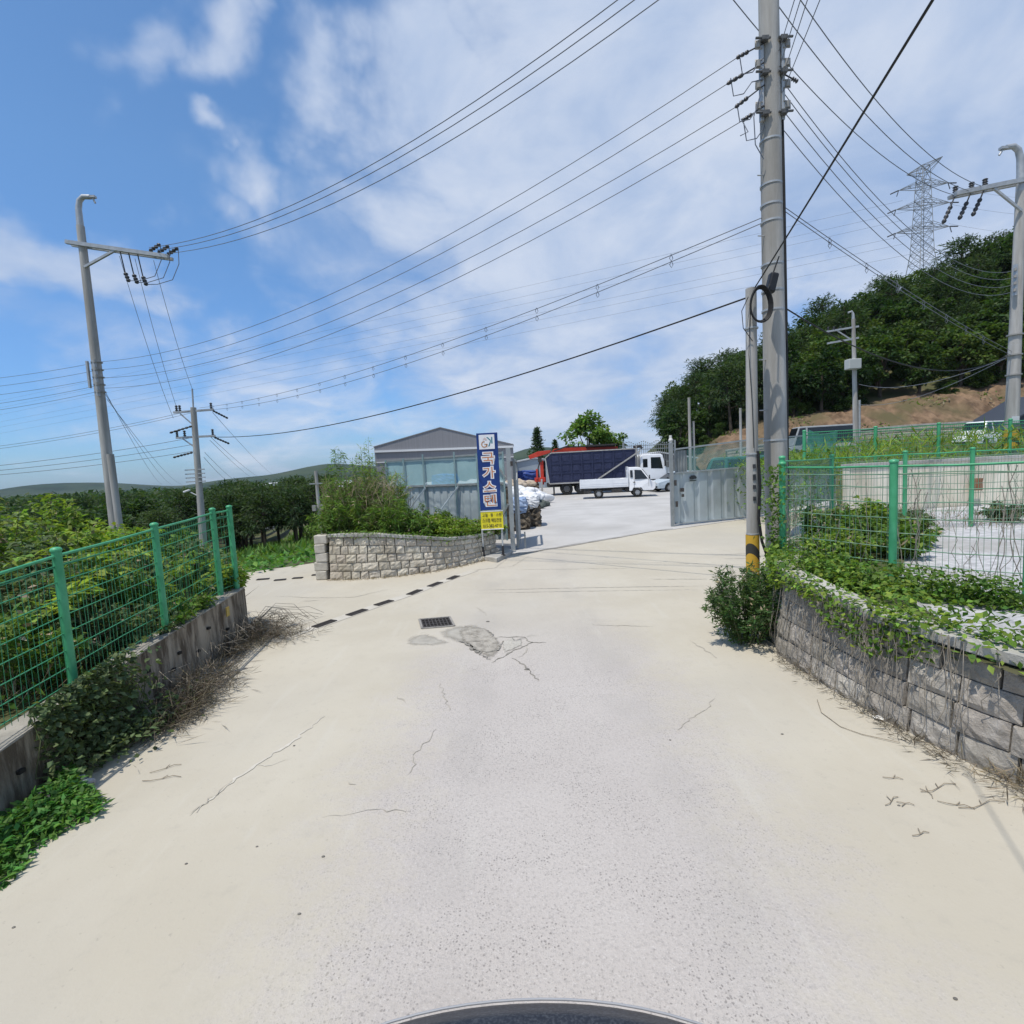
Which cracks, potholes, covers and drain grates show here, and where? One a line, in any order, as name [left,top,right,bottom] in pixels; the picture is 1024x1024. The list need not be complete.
crack [460,607,541,681]
drain grate [418,616,455,629]
